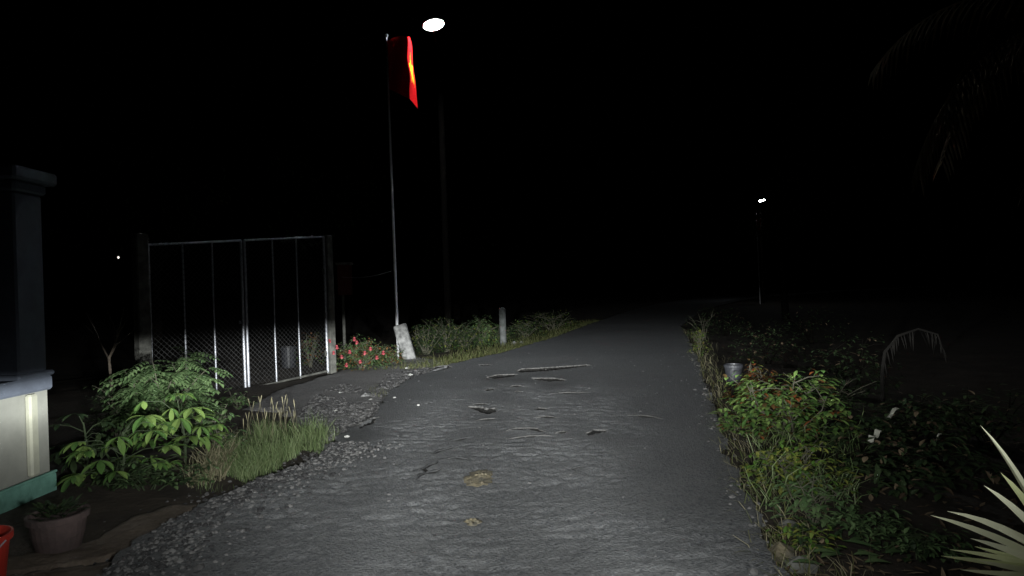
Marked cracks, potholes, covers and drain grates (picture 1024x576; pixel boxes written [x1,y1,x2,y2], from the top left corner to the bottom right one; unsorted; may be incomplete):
pothole [468,406,497,414]
crack [413,385,584,479]
